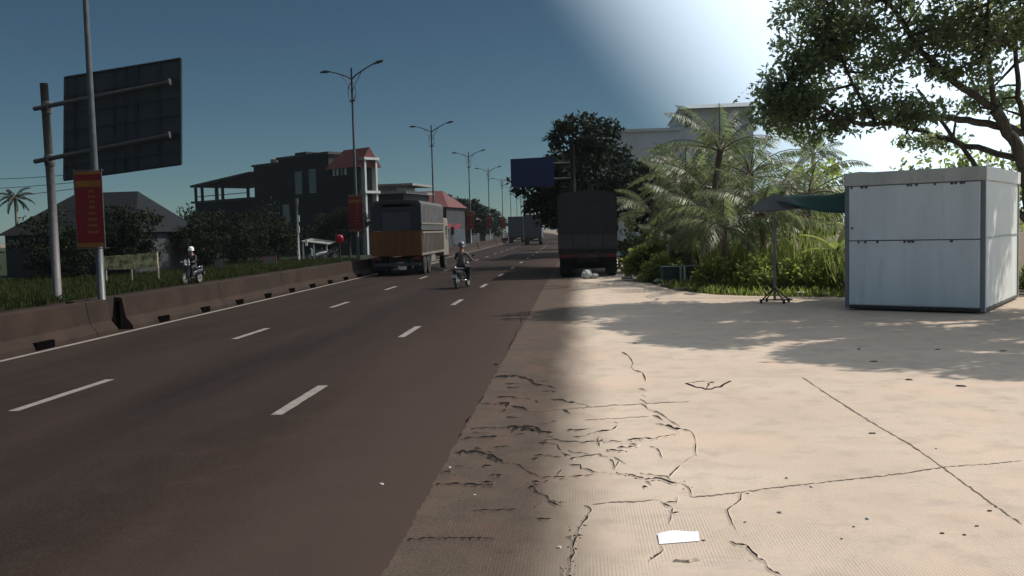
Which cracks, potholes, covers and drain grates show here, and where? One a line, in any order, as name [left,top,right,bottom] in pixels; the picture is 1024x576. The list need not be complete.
crack [435,352,698,576]
crack [725,492,782,576]
